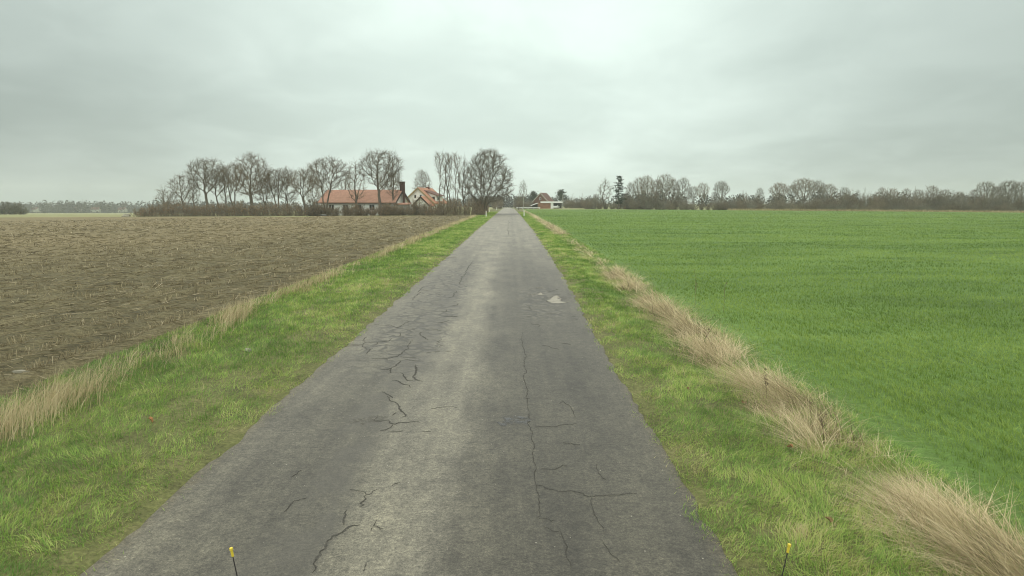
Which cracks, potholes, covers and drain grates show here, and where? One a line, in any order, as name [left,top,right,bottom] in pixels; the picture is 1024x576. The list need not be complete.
crack [313,482,400,572]
crack [539,464,637,562]
crack [339,260,471,432]
